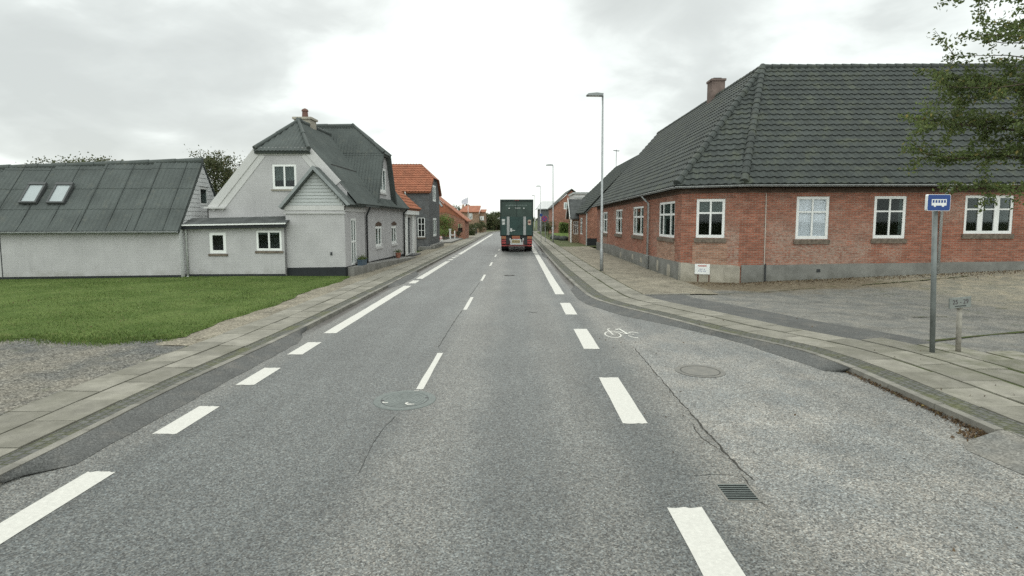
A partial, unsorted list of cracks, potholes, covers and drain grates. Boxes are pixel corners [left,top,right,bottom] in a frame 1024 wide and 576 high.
manhole cover [373,390,436,410]
drain grate [714,483,763,502]
crack [635,348,770,507]
manhole cover [675,364,726,377]
